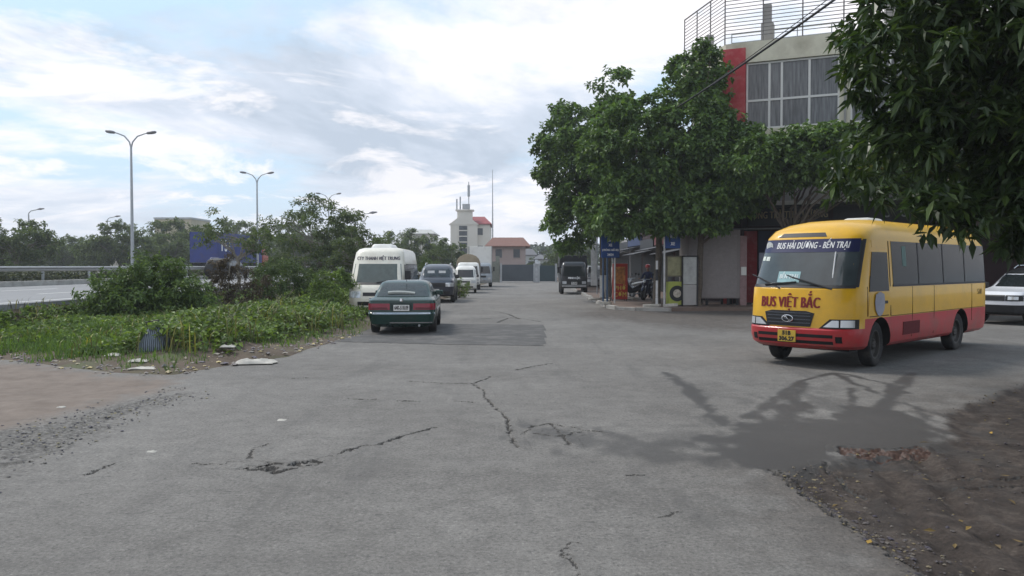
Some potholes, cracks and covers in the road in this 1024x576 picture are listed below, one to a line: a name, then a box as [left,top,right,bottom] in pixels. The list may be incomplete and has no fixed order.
crack [539,536,602,576]
crack [67,460,135,480]
pothole [825,444,953,468]
crack [633,506,703,525]
crack [483,311,544,323]
crack [319,363,616,462]
